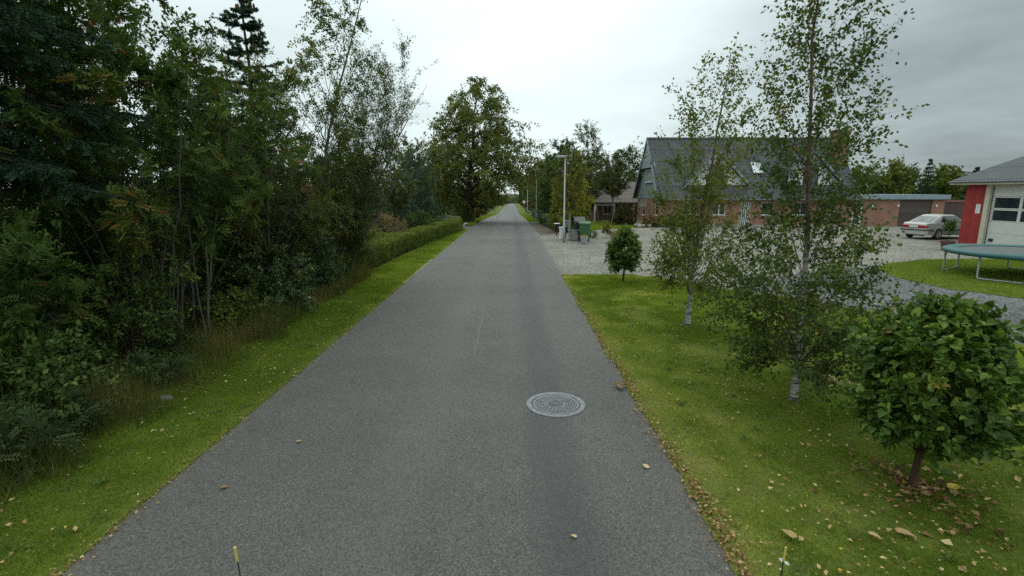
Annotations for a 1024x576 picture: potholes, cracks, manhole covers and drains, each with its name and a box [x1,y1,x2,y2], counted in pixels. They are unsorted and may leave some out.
manhole cover [526,392,586,418]
